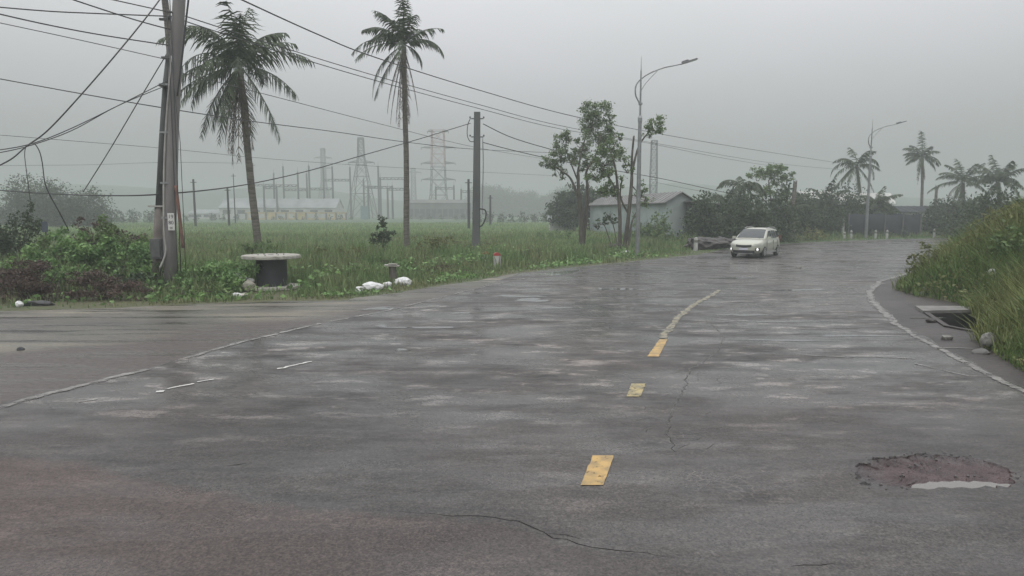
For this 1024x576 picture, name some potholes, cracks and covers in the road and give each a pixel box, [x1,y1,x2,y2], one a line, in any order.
crack [625,319,731,455]
pothole [849,451,1024,490]
